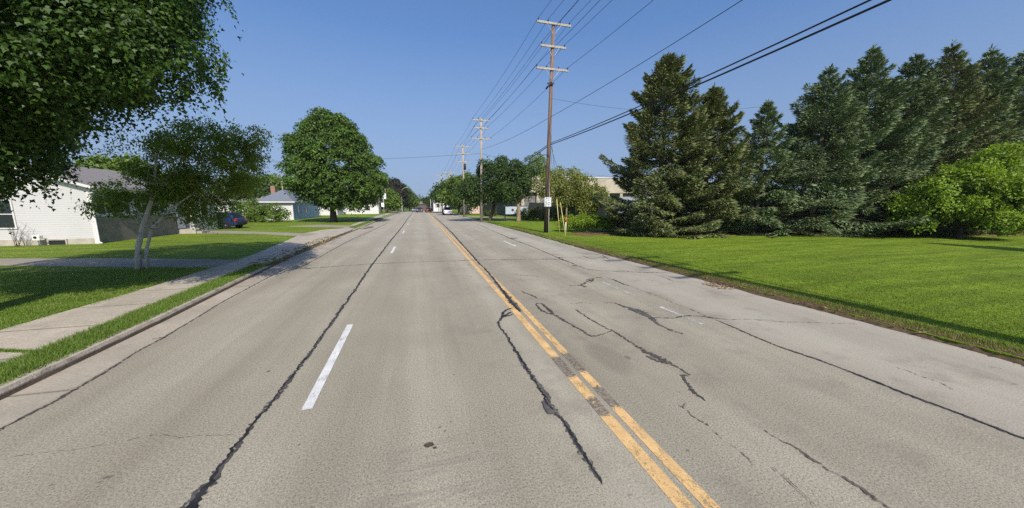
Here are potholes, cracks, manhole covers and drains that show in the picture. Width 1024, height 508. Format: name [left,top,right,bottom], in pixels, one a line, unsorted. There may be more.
crack [497,302,890,508]
